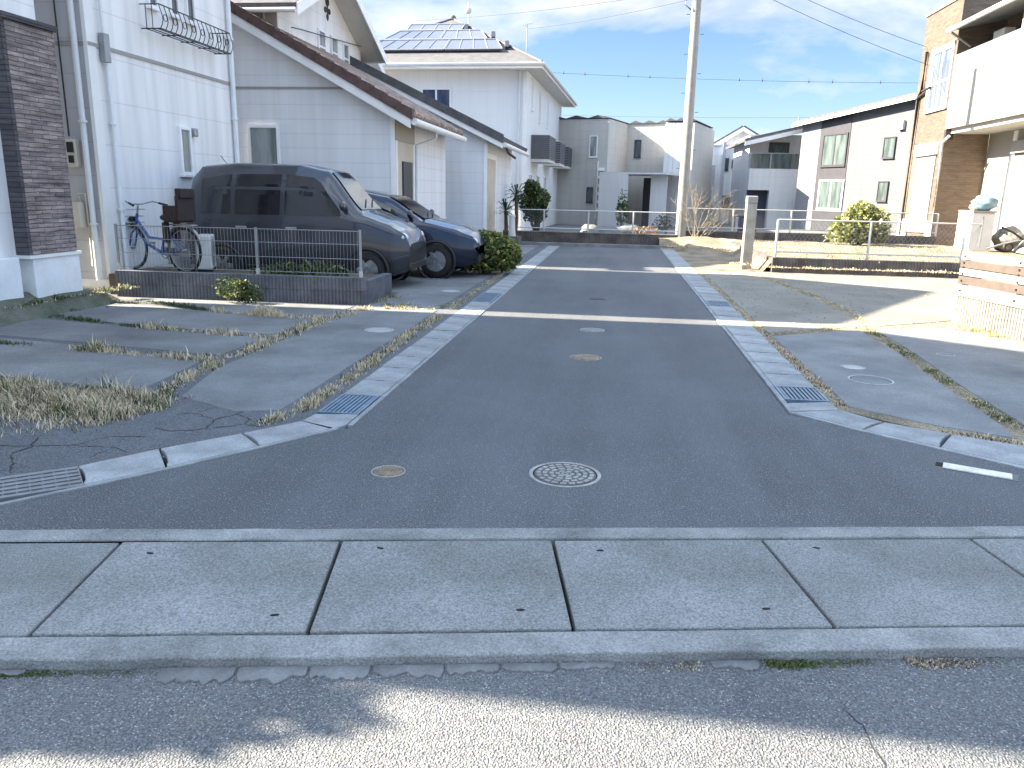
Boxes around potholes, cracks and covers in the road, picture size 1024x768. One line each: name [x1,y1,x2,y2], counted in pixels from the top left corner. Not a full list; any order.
drain grate [318,394,380,416]
crack [3,434,151,473]
drain grate [774,385,830,403]
manhole cover [847,375,894,385]
manhole cover [529,462,601,488]
manhole cover [371,465,406,478]
crack [843,703,886,768]
drain grate [0,466,84,502]
crack [159,407,263,431]
